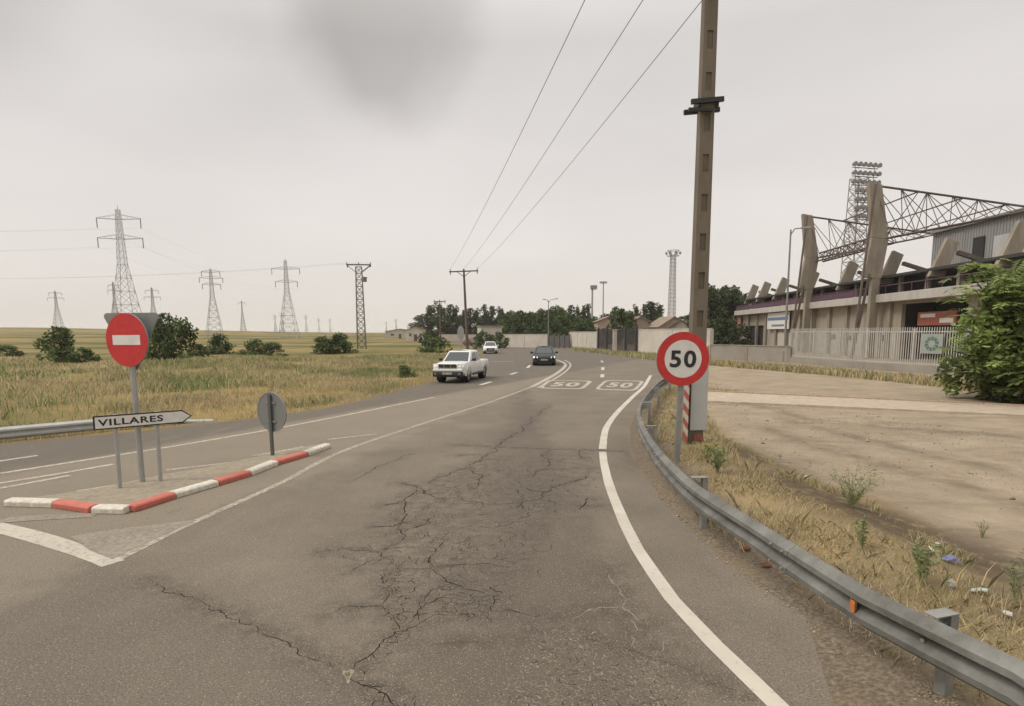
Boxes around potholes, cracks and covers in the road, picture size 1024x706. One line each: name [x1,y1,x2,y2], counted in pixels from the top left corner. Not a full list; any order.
crack [461,445,612,517]
crack [156,409,559,706]
